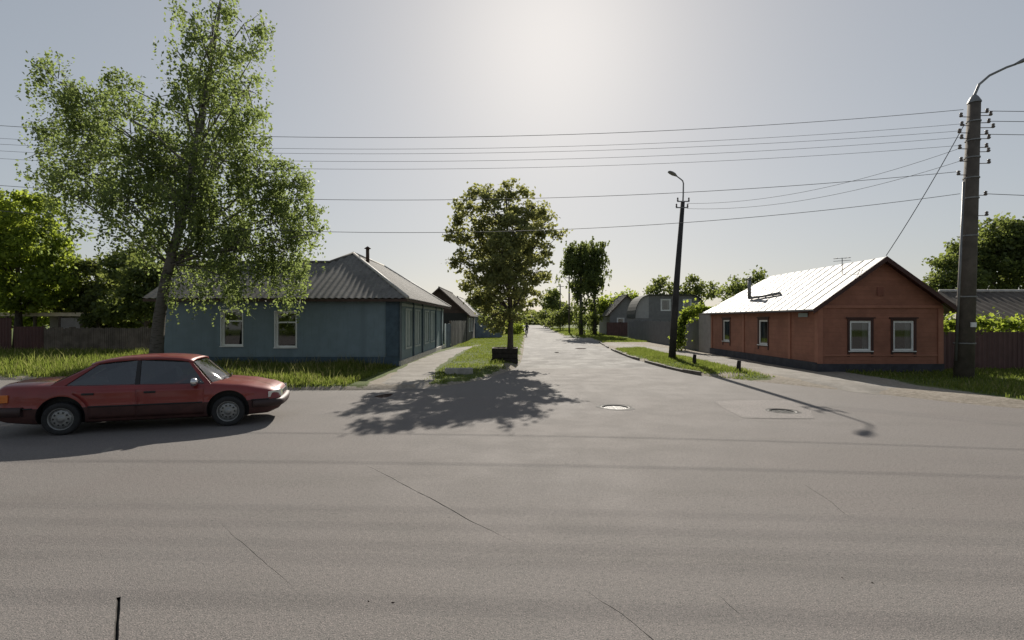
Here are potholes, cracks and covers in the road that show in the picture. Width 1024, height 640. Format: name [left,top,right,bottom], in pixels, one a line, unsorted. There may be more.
crack [382,473,515,542]
